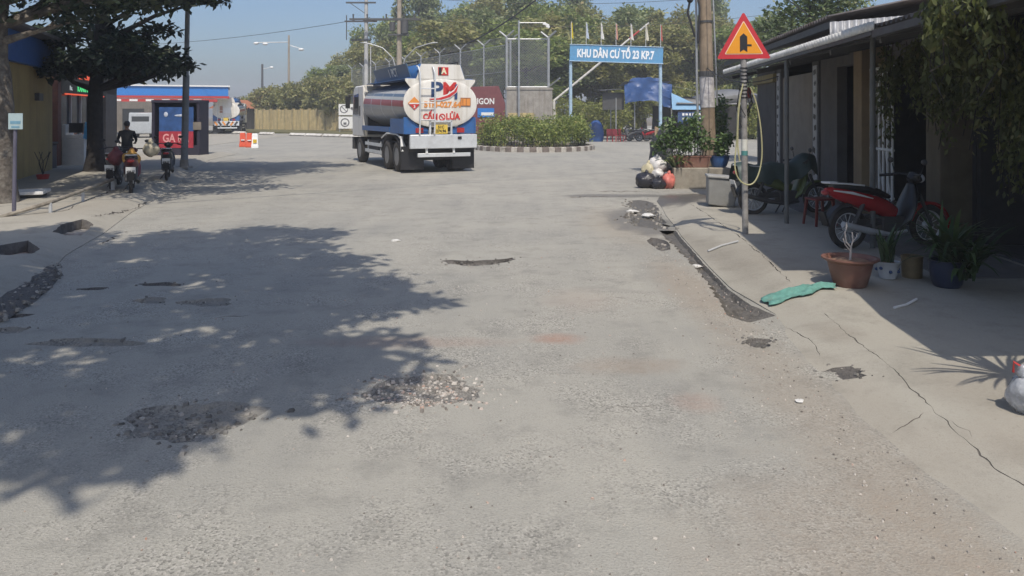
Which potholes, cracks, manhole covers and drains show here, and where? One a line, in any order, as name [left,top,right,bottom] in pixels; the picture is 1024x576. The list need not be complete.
pothole [647,238,670,251]
pothole [614,199,679,230]
pothole [25,337,145,347]
pothole [736,334,777,349]
pothole [440,257,521,267]
pothole [112,398,295,456]
pothole [335,365,517,417]
pothole [805,363,885,382]
pothole [131,296,166,304]
pothole [0,326,39,334]
pothole [164,296,236,306]
crack [825,314,1024,486]
